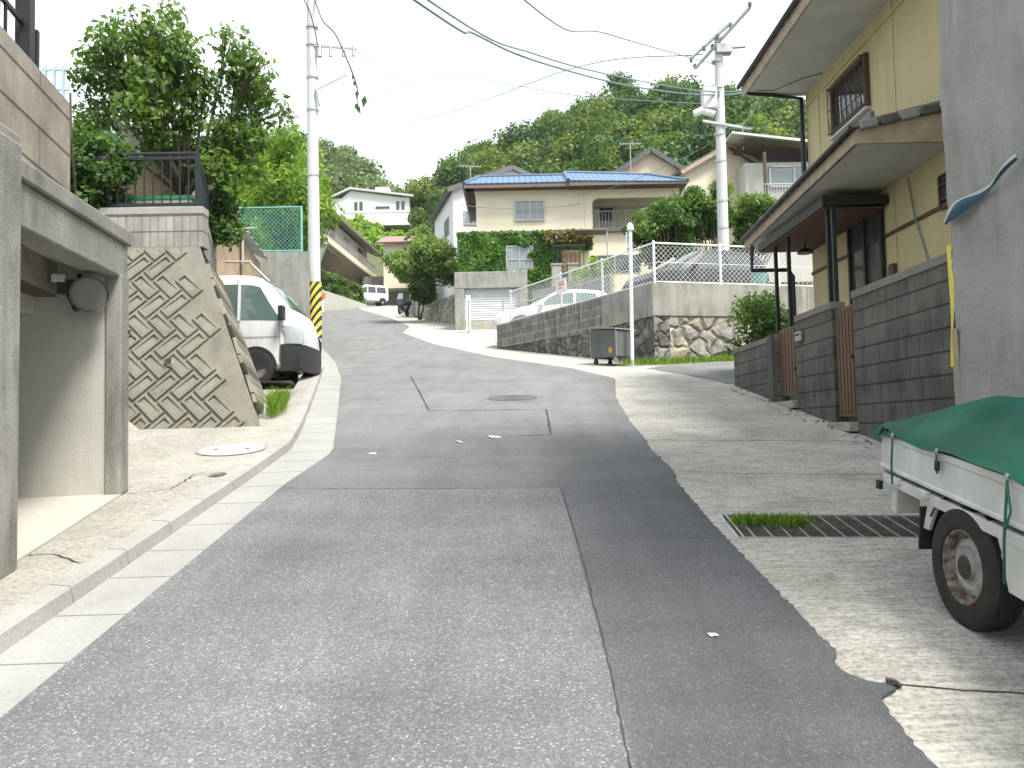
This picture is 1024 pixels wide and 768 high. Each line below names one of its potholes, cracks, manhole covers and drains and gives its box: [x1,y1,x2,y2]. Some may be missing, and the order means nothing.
drain grate [718,514,919,538]
manhole cover [195,443,268,456]
